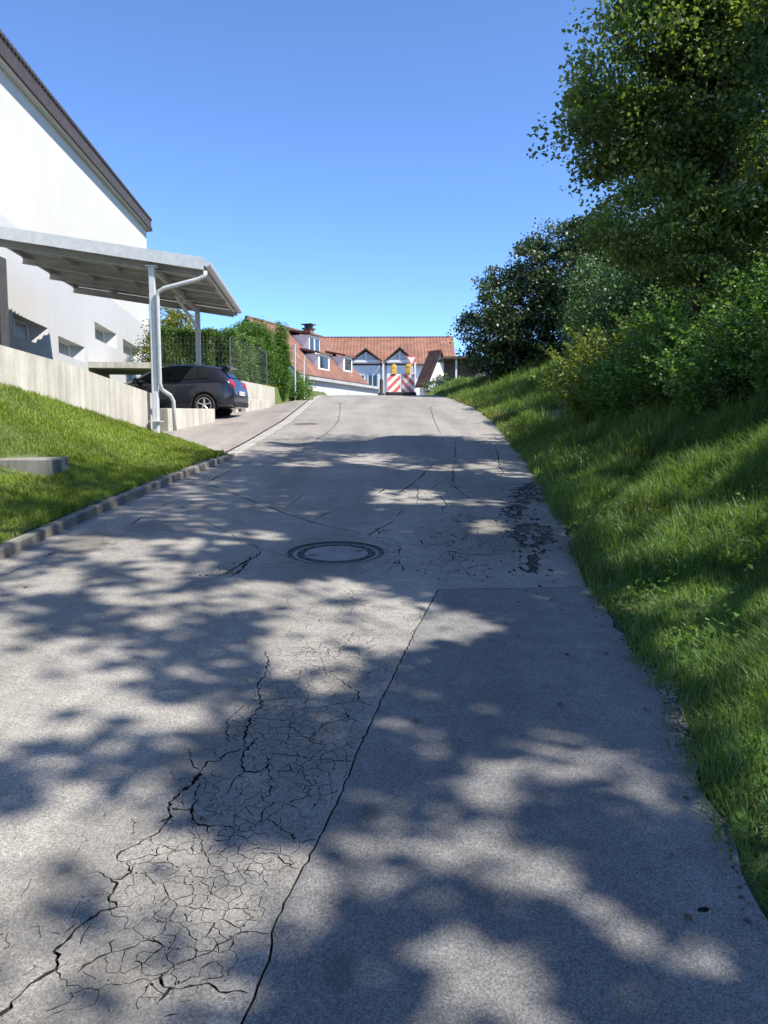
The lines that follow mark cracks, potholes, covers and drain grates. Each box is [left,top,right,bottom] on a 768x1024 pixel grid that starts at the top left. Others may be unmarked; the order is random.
pothole [499,482,549,516]
manhole cover [288,542,385,565]
crack [1,459,355,577]
pothole [494,517,562,557]
crack [0,578,424,1024]
pothole [498,502,537,522]
crack [367,407,548,590]
pothole [508,547,554,588]
